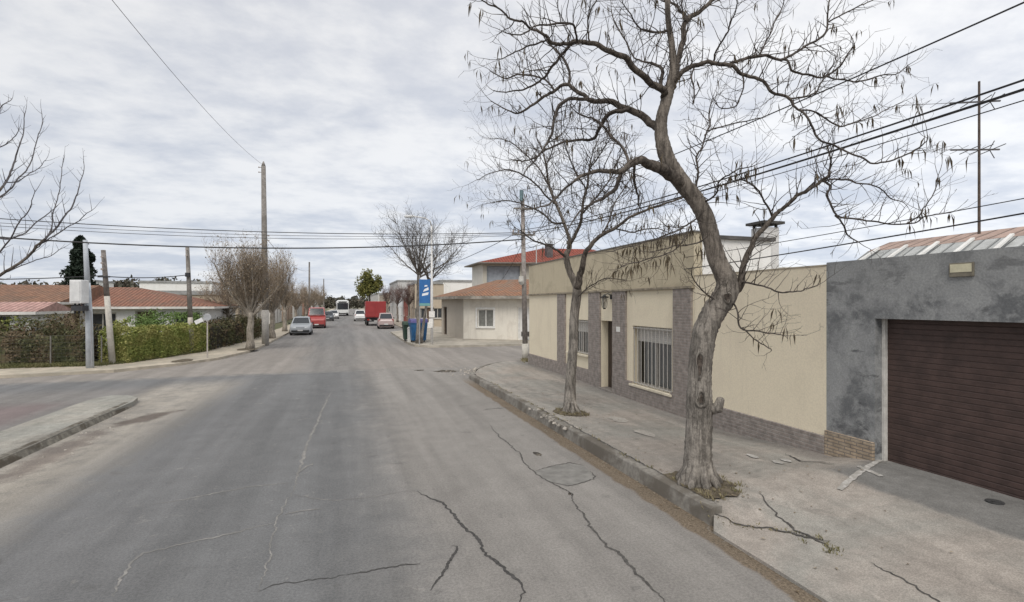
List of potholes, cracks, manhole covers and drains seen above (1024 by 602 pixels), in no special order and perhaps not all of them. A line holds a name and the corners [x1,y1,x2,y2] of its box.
crack [112,396,665,602]
crack [760,493,831,548]
